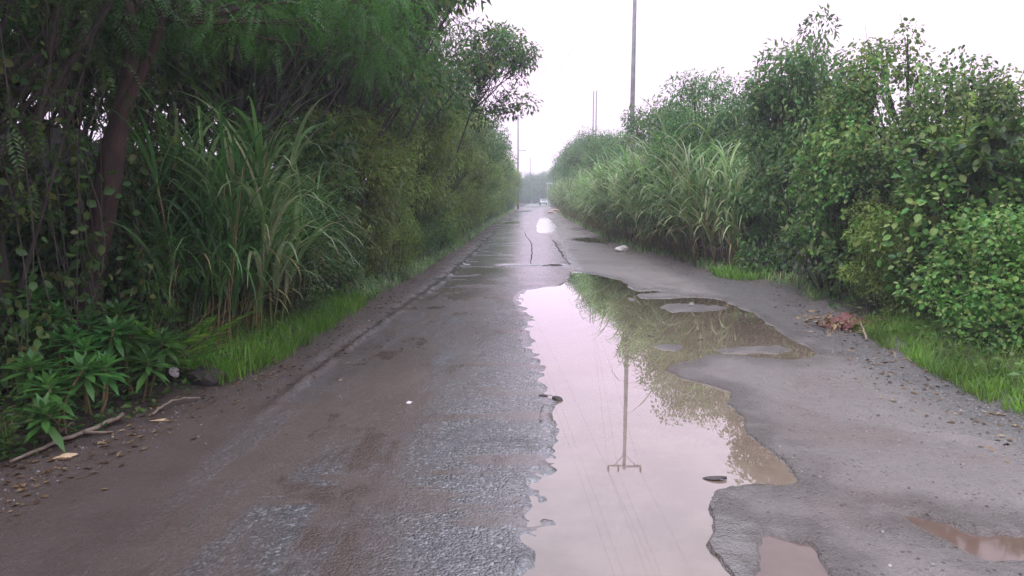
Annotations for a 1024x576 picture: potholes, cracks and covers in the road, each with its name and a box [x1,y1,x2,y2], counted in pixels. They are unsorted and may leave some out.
pothole [513,271,820,576]
crack [505,233,570,266]
pothole [535,217,557,233]
pothole [892,506,1024,563]
pothole [753,532,835,576]
